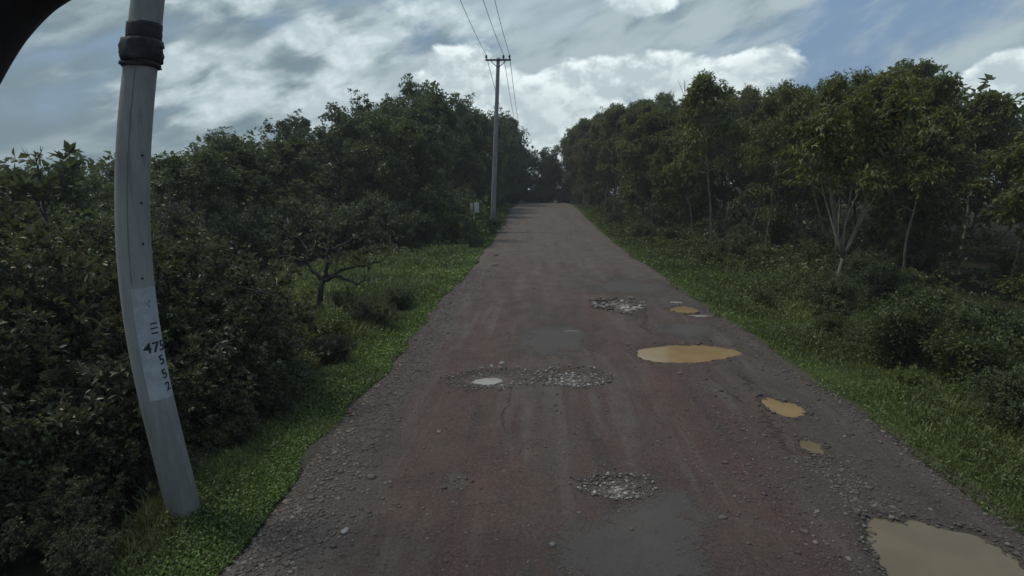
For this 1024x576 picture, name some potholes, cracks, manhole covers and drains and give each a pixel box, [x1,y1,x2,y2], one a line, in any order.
pothole [439,366,542,390]
pothole [576,472,659,503]
pothole [589,296,652,314]
pothole [792,434,833,462]
pothole [754,392,815,419]
pothole [849,507,1024,576]
pothole [533,365,615,388]
pothole [664,304,705,314]
pothole [620,340,759,364]
